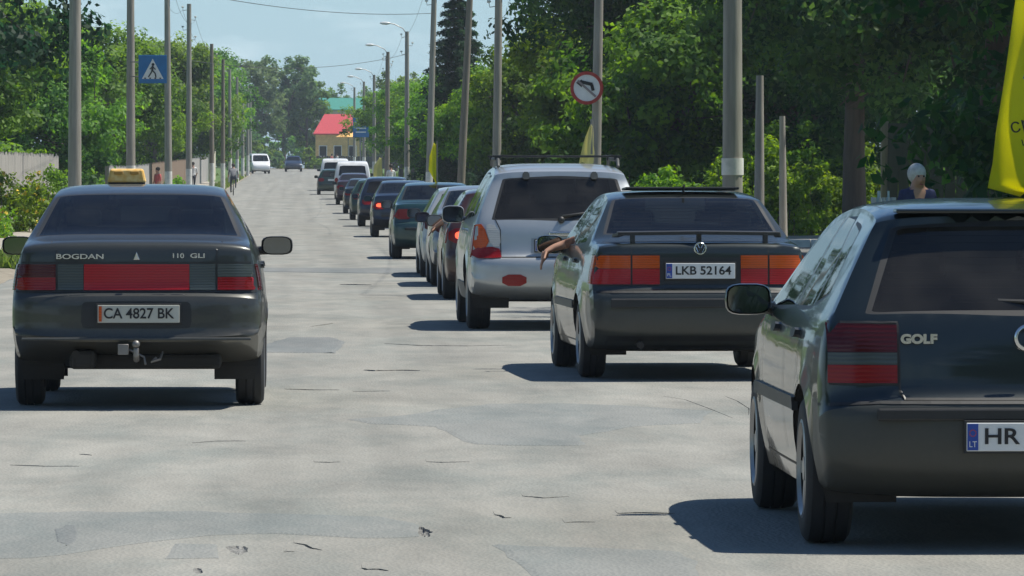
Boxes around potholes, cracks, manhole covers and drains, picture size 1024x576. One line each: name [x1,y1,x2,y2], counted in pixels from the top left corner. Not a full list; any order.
crack [10,452,93,467]
crack [493,494,569,518]
crack [284,539,322,552]
pothole [226,546,248,555]
